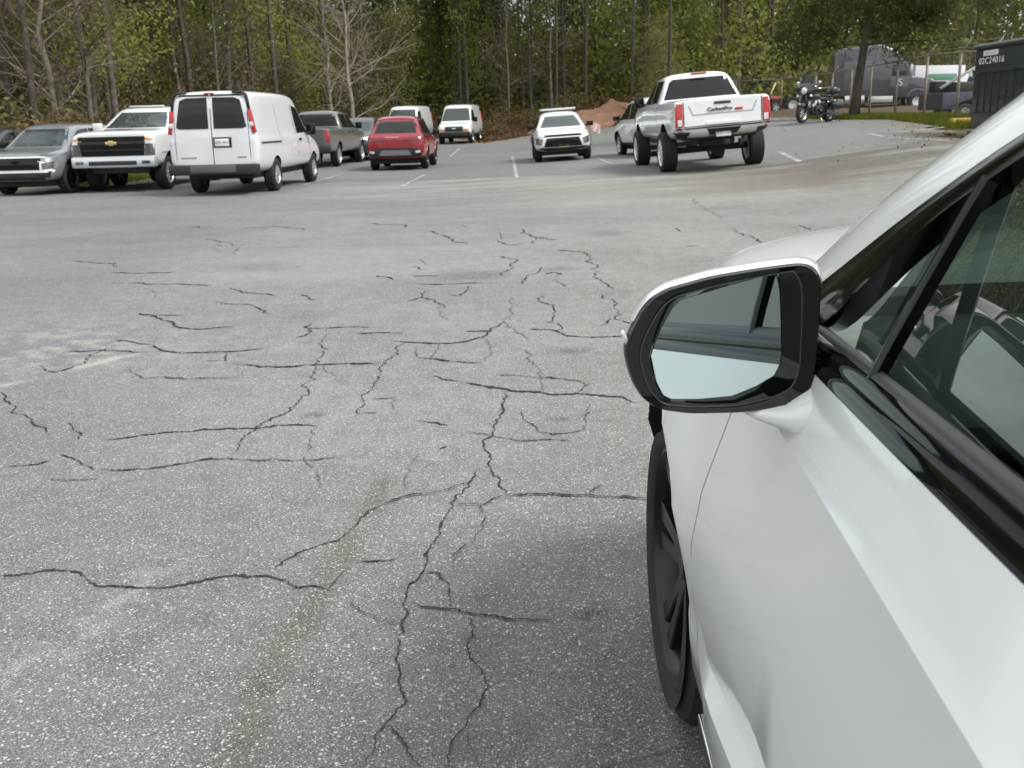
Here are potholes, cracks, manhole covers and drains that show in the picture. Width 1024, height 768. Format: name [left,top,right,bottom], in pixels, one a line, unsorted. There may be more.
crack [0,229,643,767]
